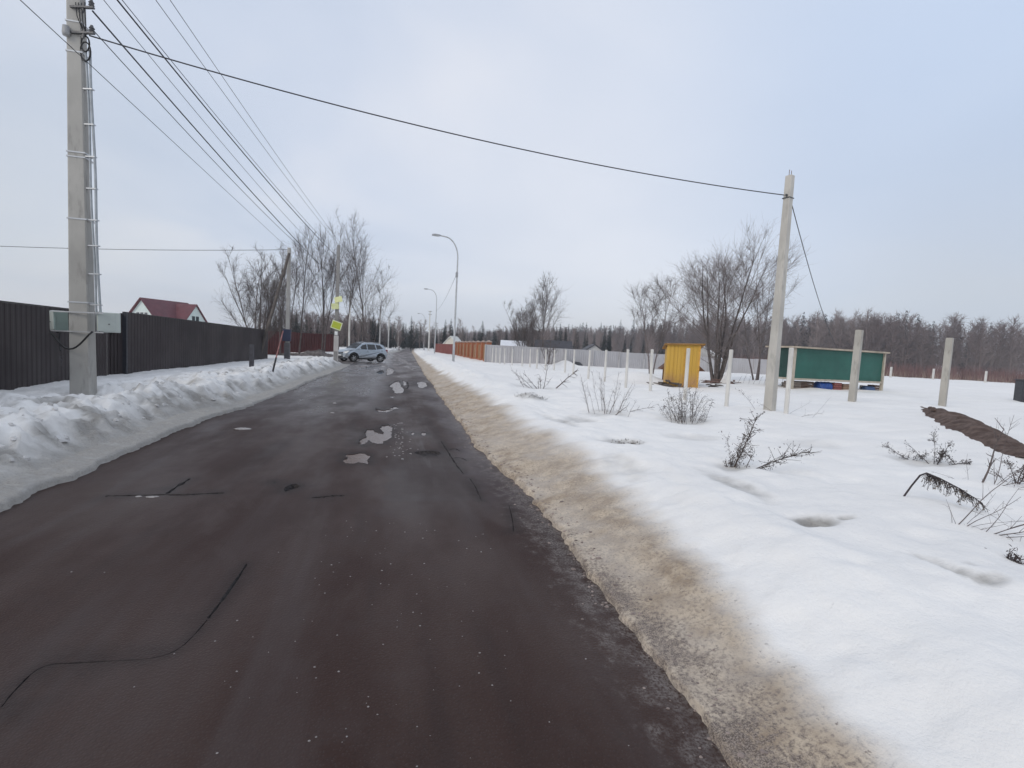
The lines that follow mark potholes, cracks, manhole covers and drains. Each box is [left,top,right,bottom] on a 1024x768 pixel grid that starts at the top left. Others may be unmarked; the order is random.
crack [441,441,482,501]
